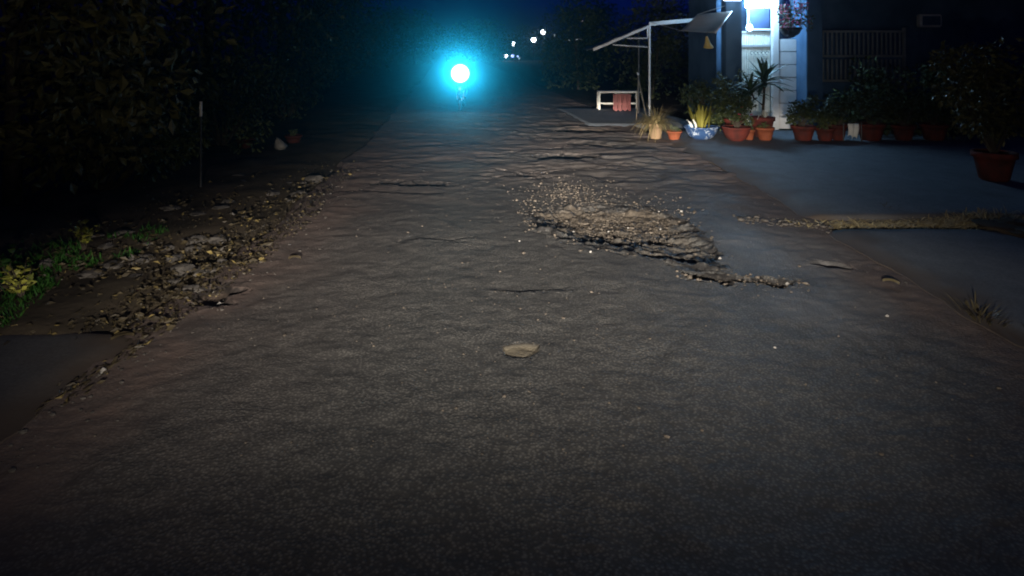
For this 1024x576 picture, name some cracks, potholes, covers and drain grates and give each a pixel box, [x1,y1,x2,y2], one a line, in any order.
crack [468,136,603,179]
pothole [675,268,810,290]
crack [390,236,479,244]
pothole [522,202,734,275]
